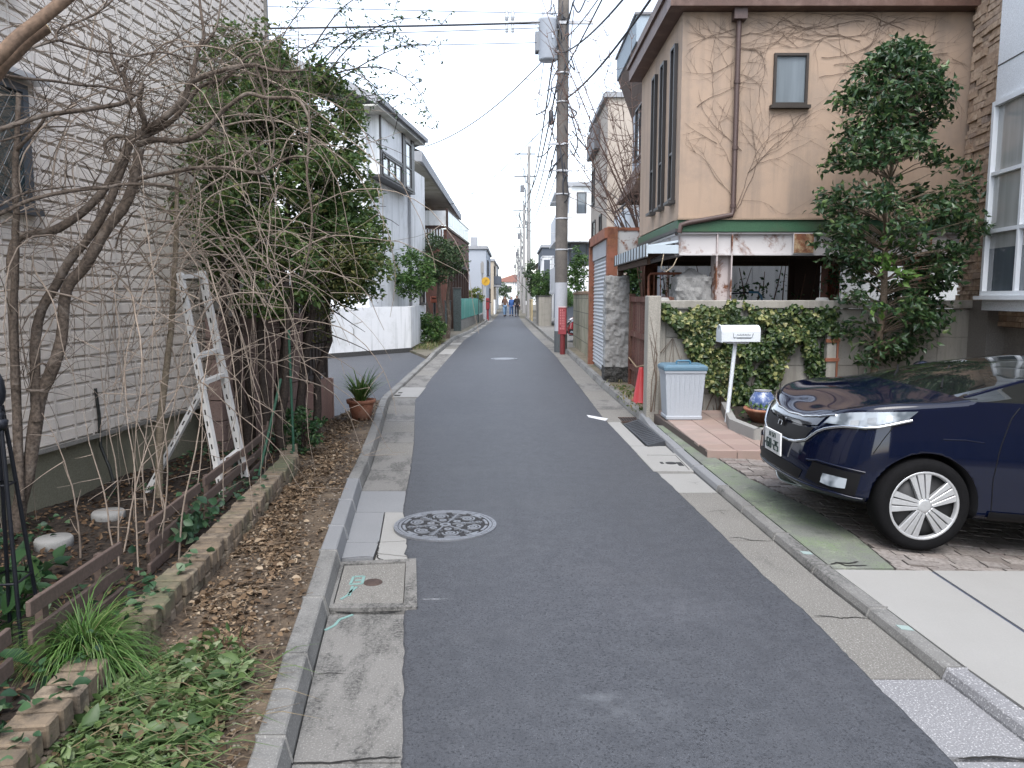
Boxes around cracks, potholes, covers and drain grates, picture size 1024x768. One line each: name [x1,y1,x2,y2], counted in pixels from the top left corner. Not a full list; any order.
manhole cover [394,510,496,542]
utility cover [329,558,417,614]
